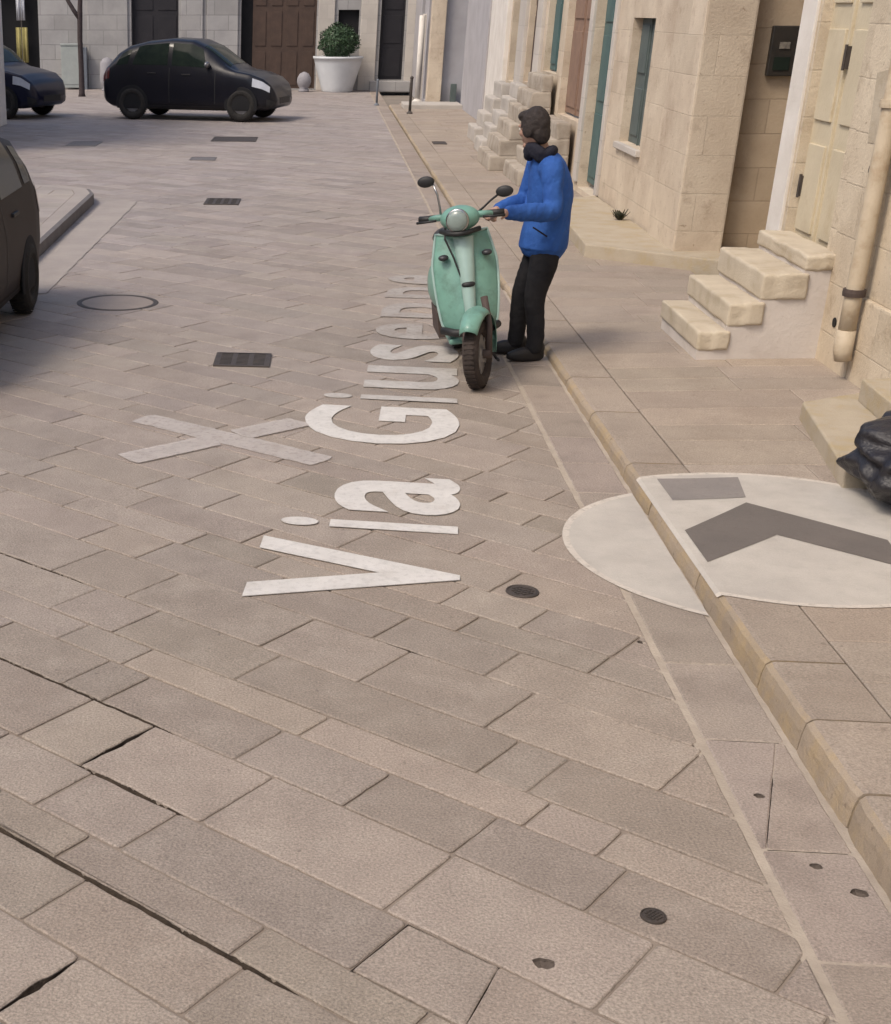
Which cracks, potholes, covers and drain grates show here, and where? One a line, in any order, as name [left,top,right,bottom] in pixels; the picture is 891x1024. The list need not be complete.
drain grate [213,352,272,368]
manhole cover [506,584,539,598]
manhole cover [640,907,667,925]
pothole [532,958,555,969]
crack [0,658,297,1012]
manhole cover [77,295,159,311]
